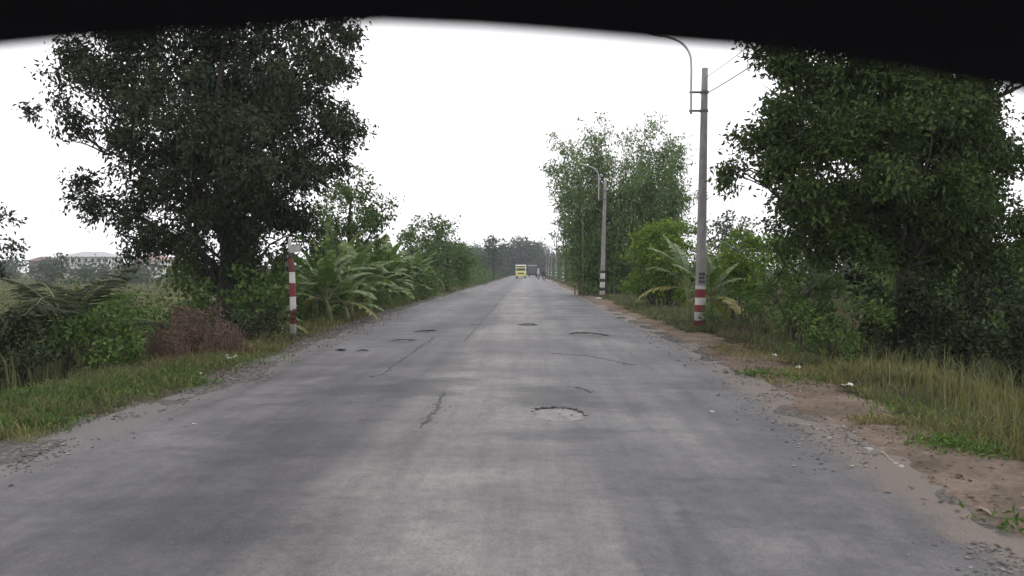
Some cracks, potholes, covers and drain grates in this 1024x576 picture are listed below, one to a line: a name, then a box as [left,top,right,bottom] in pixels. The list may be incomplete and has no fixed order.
crack [551,353,635,365]
pothole [528,405,591,422]
crack [366,337,434,379]
crack [418,393,451,427]
